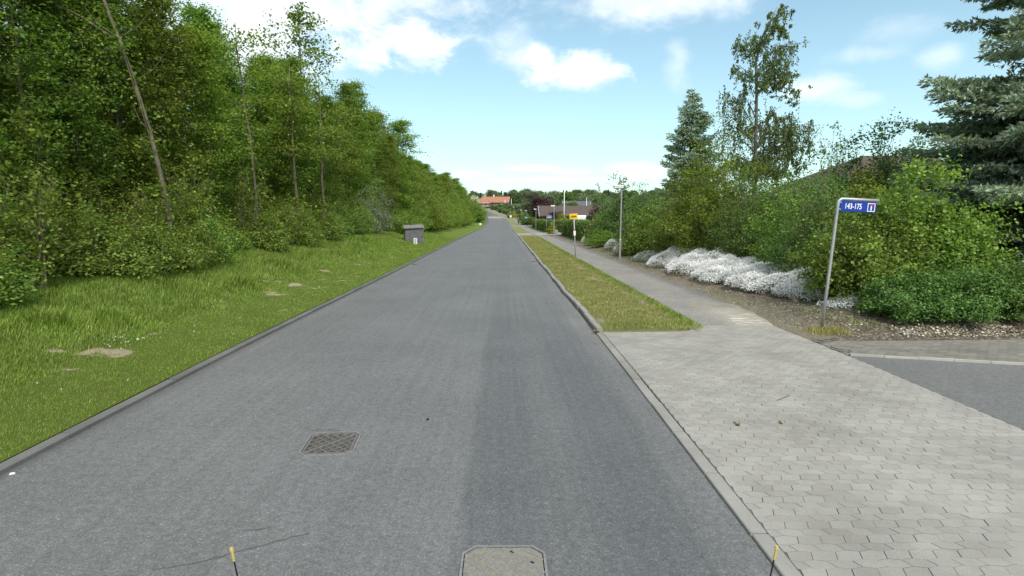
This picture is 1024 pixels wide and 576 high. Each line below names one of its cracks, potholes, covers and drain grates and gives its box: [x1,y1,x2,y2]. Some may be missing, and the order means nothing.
drain grate [298,431,362,456]
crack [153,527,308,570]
manhole cover [459,545,548,576]
